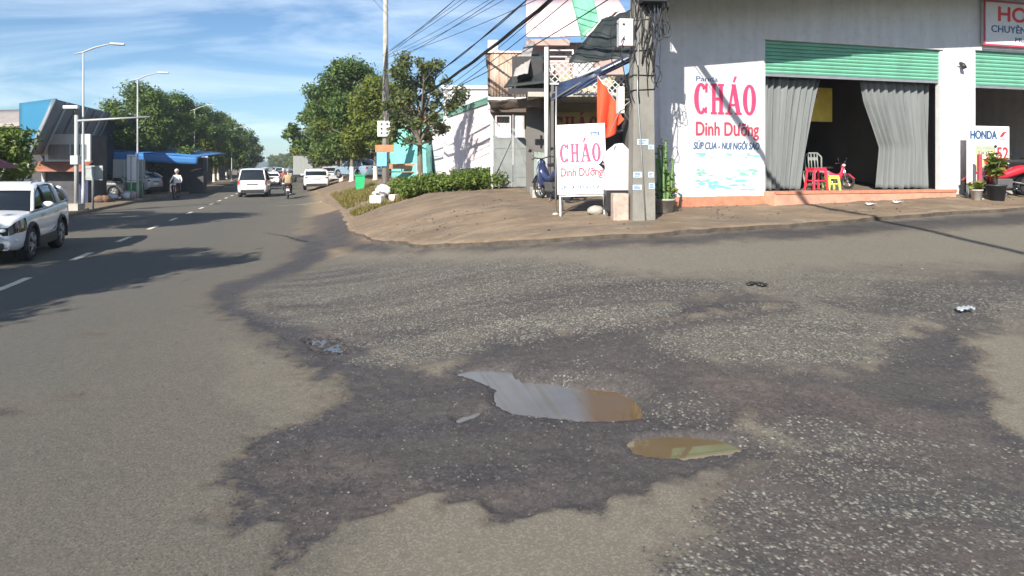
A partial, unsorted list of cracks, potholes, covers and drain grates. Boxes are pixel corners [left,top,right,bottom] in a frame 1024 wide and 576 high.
pothole [616,427,753,463]
pothole [297,330,366,356]
pothole [450,360,669,424]
